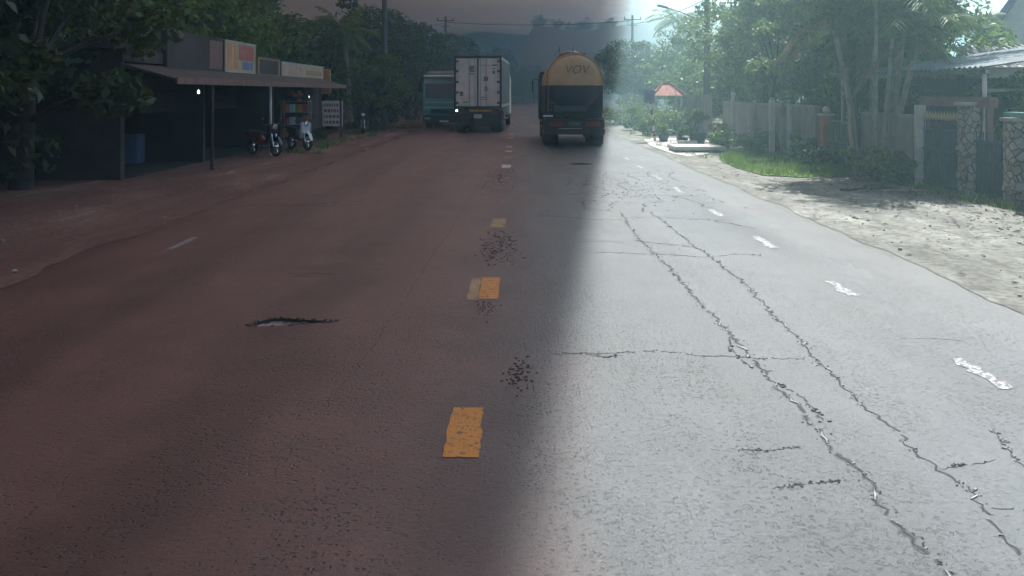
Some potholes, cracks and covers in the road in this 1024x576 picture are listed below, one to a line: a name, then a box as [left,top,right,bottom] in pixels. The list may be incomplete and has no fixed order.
pothole [245,316,339,327]
crack [482,162,1024,576]
